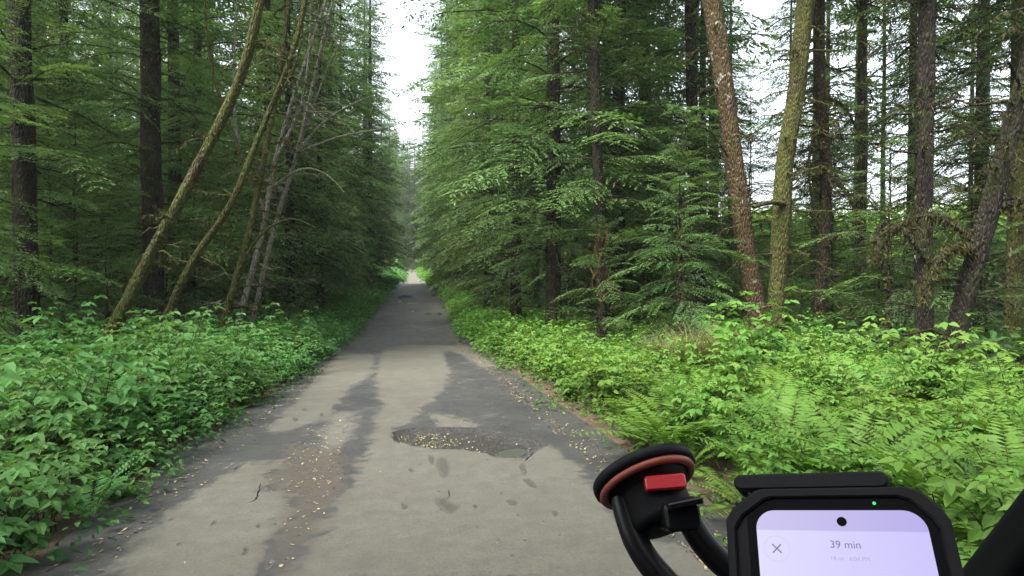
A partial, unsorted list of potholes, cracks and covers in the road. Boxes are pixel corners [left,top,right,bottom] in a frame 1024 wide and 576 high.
pothole [392,427,548,458]
